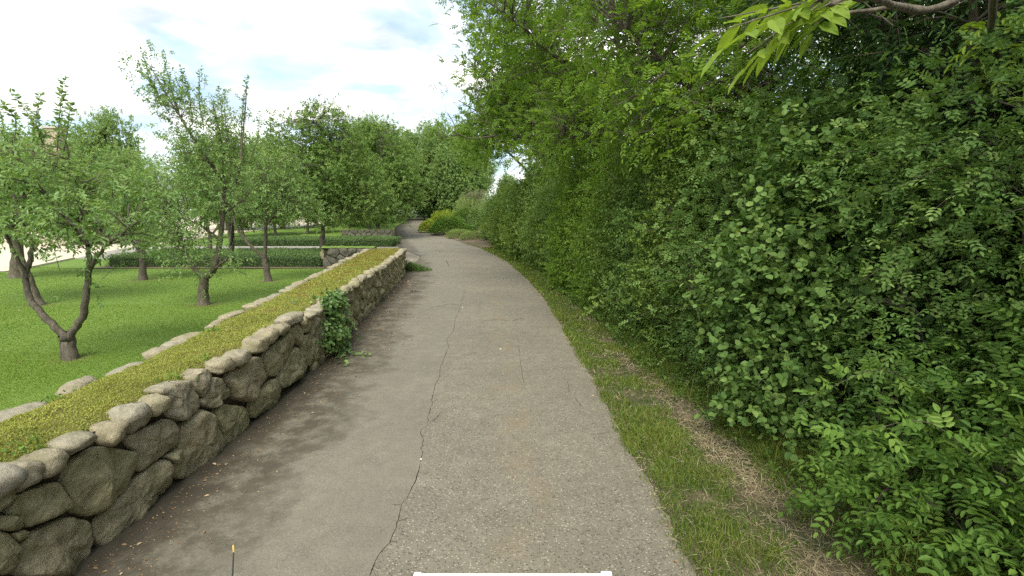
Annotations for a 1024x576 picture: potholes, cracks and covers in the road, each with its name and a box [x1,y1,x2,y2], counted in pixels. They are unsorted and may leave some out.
crack [370,292,465,575]
